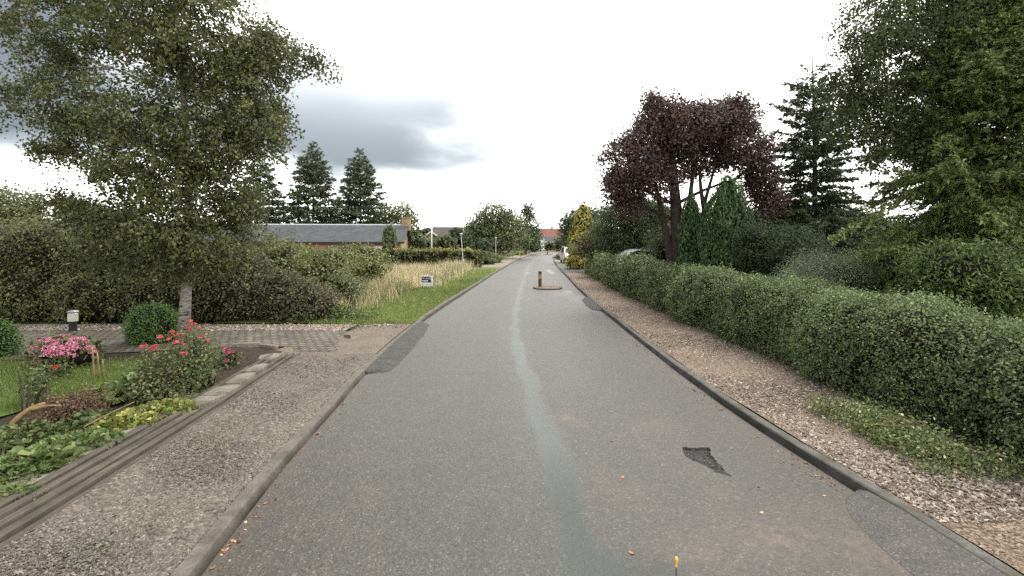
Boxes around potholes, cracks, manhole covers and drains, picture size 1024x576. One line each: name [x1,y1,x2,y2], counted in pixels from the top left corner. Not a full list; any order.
pothole [682,447,731,477]
